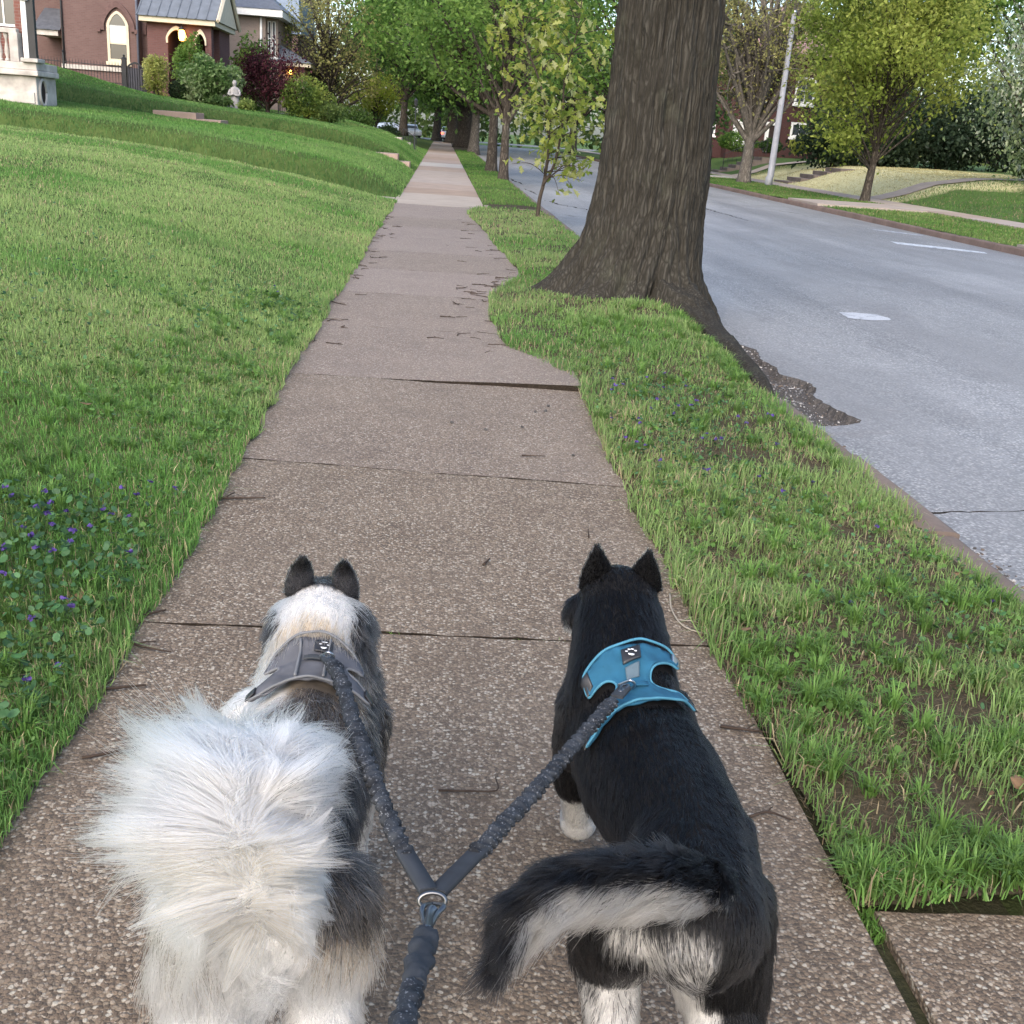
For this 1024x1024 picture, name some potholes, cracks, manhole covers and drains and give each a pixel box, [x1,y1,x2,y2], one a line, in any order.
pothole [741,345,862,426]
